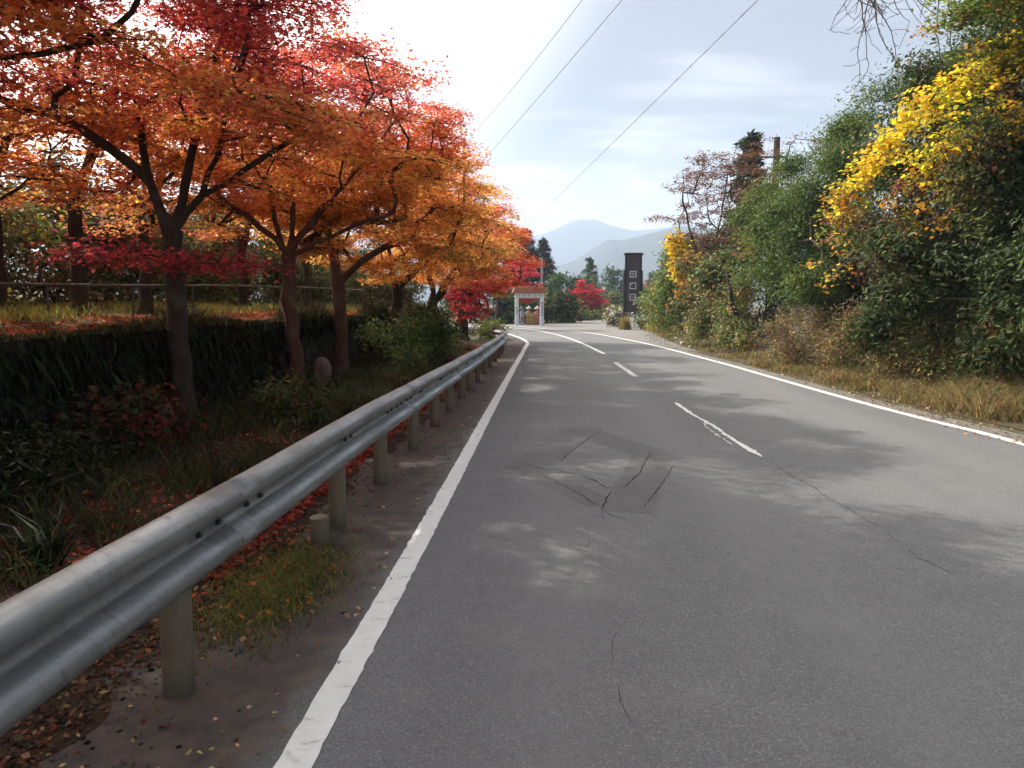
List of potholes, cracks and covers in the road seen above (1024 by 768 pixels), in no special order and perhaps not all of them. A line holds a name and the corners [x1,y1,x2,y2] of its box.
crack [770,461,950,573]
crack [518,432,672,520]
